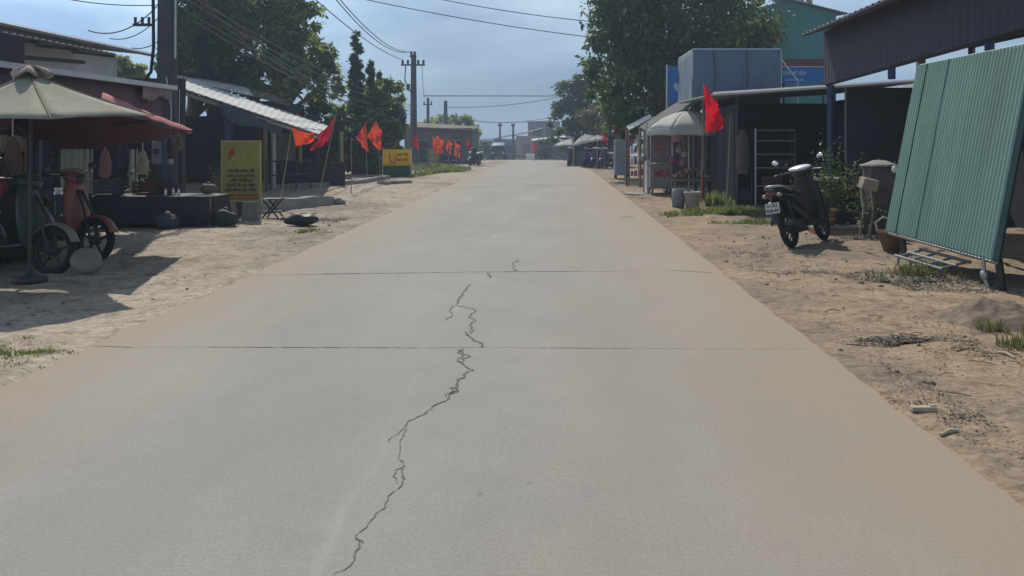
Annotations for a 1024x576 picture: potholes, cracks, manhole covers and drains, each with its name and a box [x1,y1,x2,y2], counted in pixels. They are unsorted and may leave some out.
crack [334,286,484,574]
